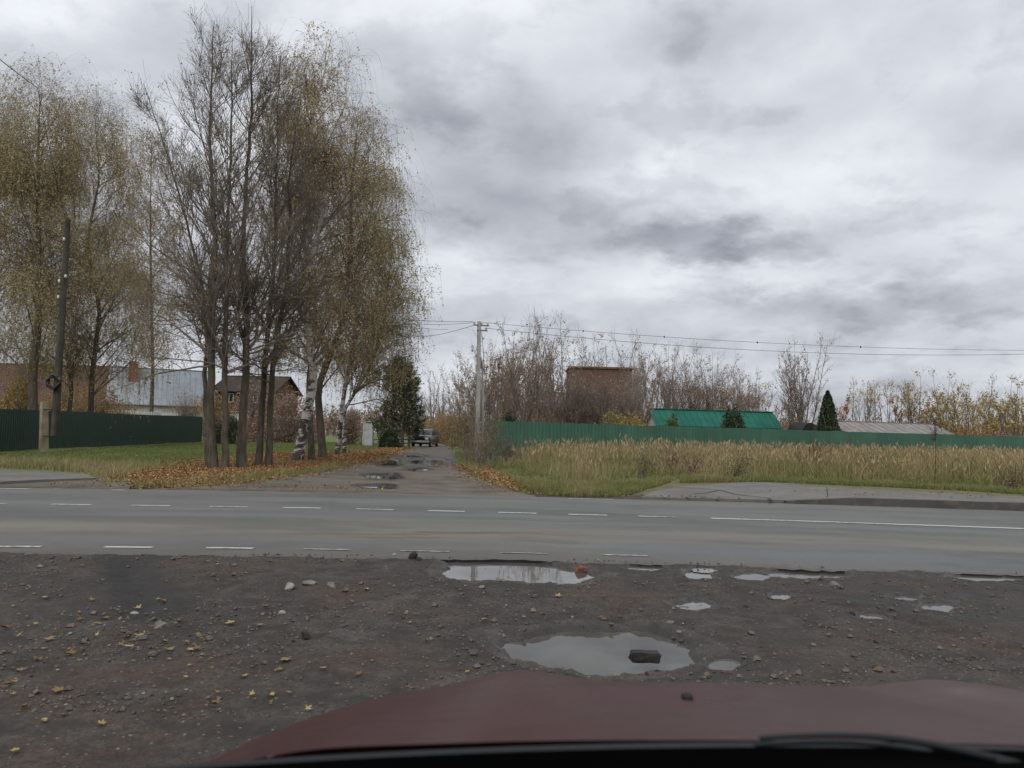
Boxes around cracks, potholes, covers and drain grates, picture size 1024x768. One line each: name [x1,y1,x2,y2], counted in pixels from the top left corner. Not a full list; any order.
pothole [757,567,857,580]
pothole [679,567,721,581]
pothole [766,589,797,601]
pothole [464,618,732,682]
pothole [358,472,406,481]
pothole [938,572,1024,582]
pothole [661,596,719,613]
pothole [421,457,455,468]
pothole [725,569,776,581]
pothole [908,597,963,614]
pothole [702,653,749,673]
